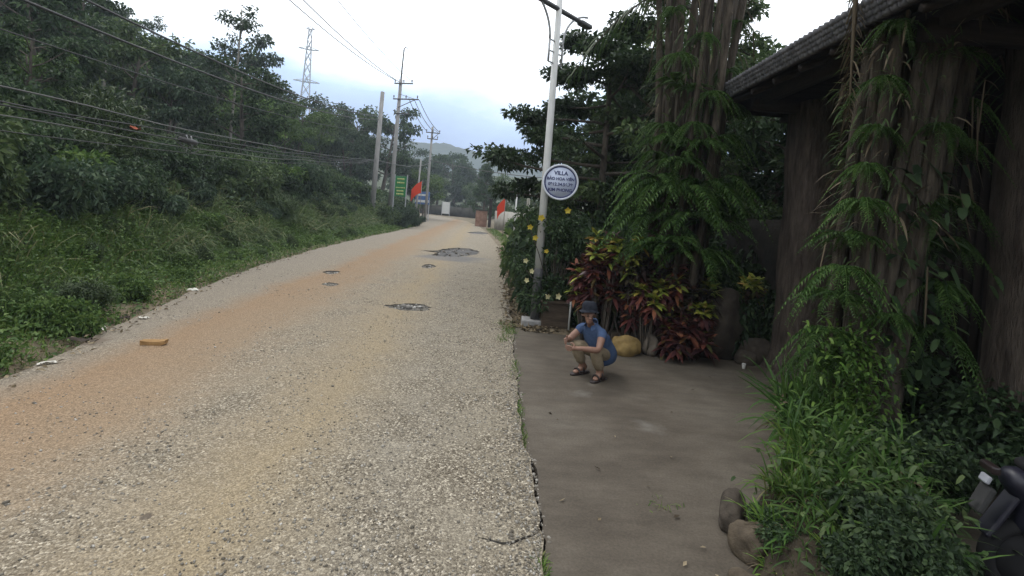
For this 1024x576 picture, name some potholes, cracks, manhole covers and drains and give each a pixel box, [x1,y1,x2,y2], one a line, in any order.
pothole [384,303,432,311]
pothole [422,248,479,257]
crack [478,531,539,545]
